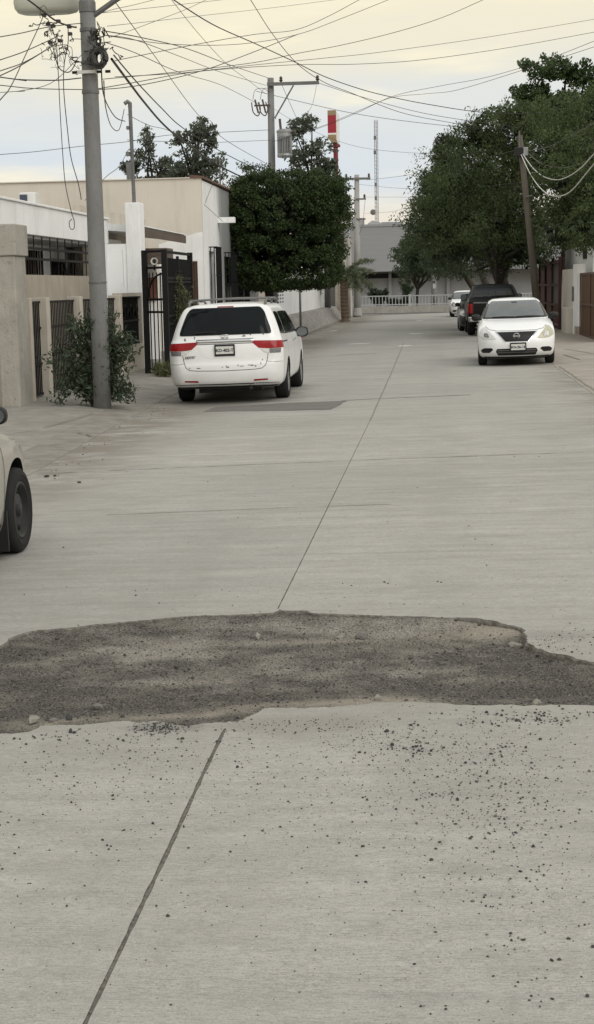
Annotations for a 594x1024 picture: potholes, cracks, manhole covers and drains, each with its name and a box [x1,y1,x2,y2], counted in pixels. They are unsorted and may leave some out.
pothole [0,610,594,734]
